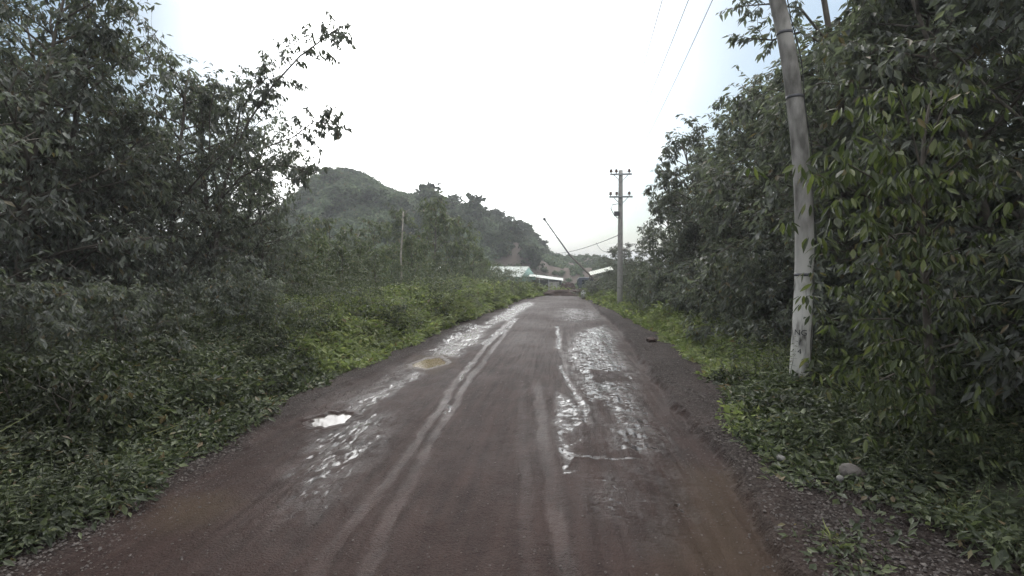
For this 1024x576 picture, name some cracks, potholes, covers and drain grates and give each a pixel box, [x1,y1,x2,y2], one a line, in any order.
pothole [302,409,364,430]
pothole [406,355,451,371]
